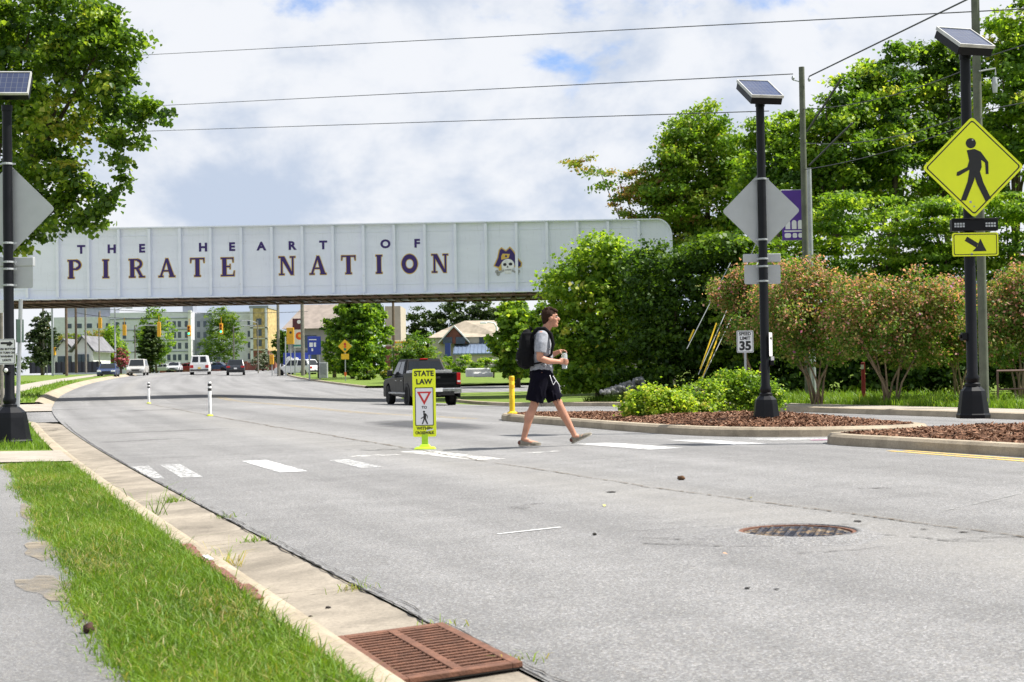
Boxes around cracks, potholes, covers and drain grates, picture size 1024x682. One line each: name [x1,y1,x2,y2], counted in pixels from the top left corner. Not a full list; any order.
drain grate [338,622,523,682]
manhole cover [691,523,886,546]
